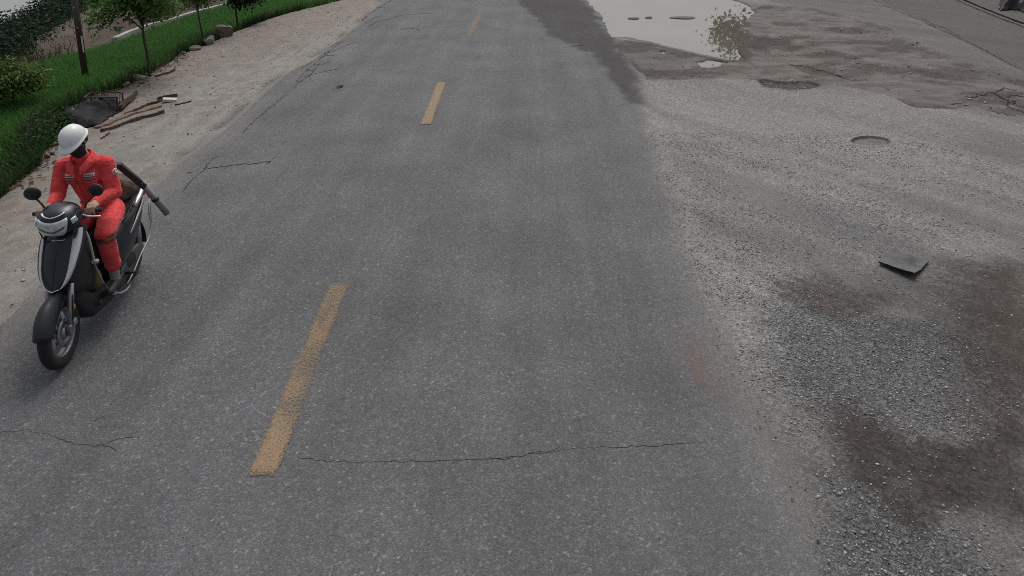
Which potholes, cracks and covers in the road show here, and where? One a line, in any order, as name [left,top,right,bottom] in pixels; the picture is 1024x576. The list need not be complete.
pothole [754,78,829,91]
crack [298,441,706,463]
crack [3,415,139,450]
crack [243,0,428,133]
crack [184,141,287,190]
crack [951,87,1024,118]
